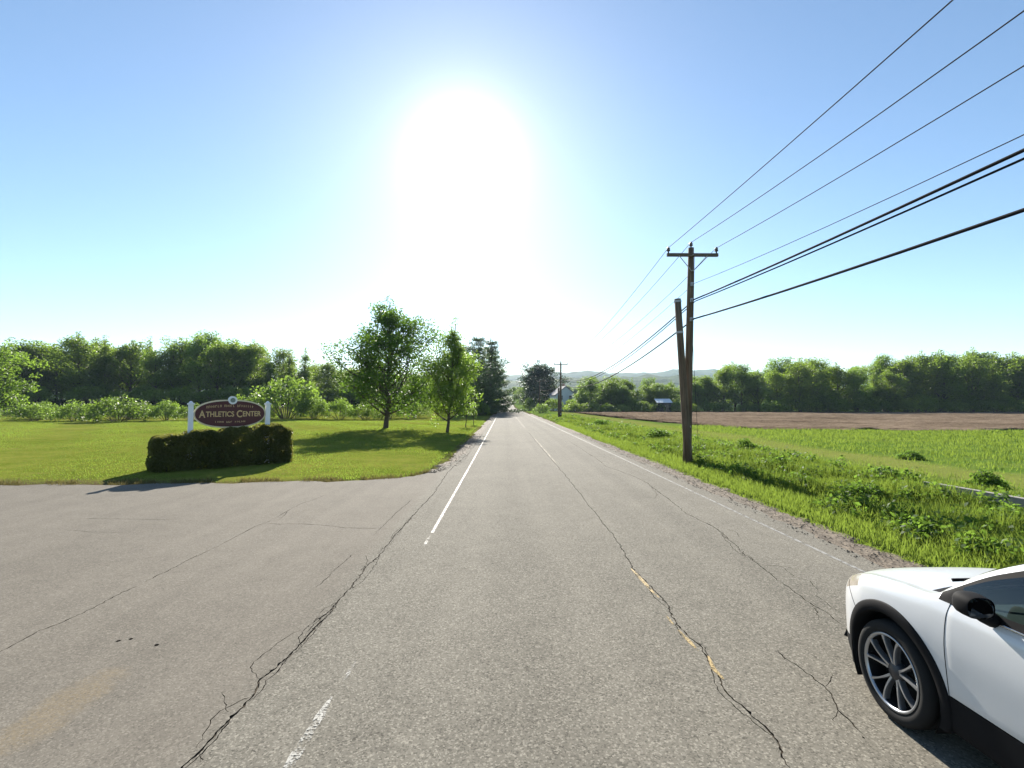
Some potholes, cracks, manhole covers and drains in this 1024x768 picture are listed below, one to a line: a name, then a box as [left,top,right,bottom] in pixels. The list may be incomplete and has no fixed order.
crack [181,442,477,768]
crack [530,434,790,768]
crack [574,444,842,625]
crack [778,652,865,739]
